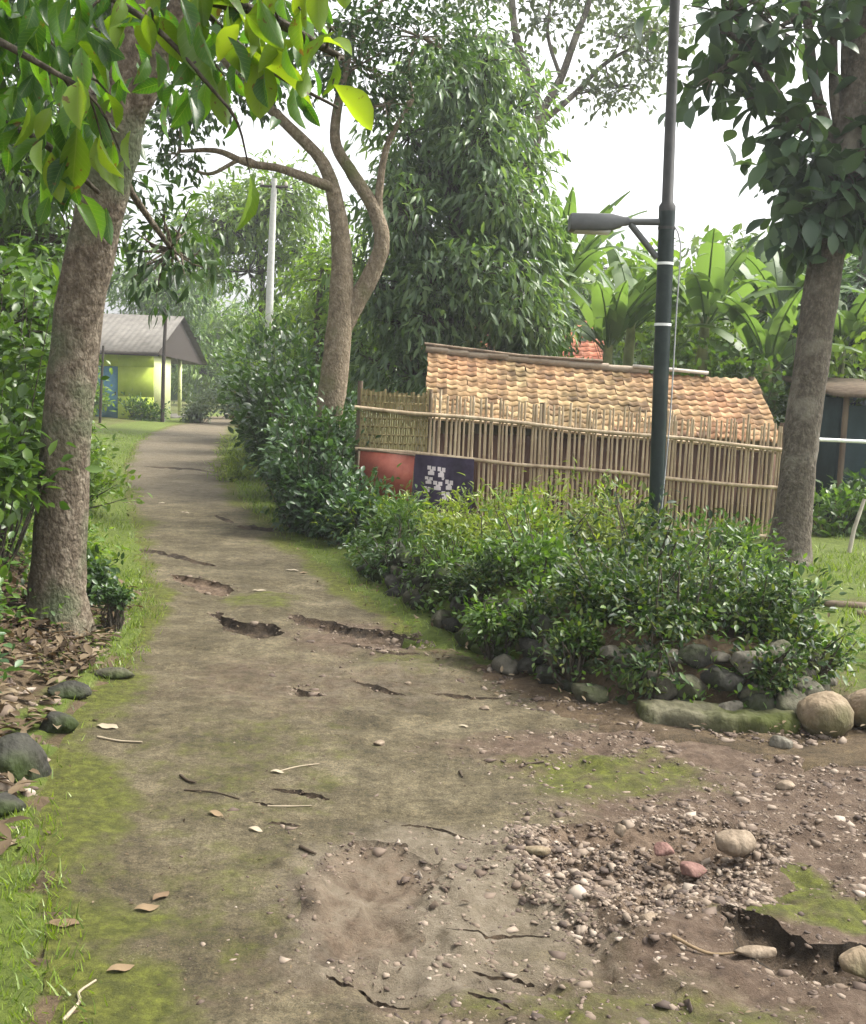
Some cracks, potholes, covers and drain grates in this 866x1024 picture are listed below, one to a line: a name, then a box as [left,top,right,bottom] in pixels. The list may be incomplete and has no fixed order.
pothole [211,612,284,639]
pothole [717,904,866,988]
crack [446,928,550,940]
crack [401,824,480,842]
crack [215,515,285,532]
pothole [171,575,234,597]
pothole [286,613,425,649]
pothole [286,840,447,979]
crack [352,680,406,697]
crack [139,549,217,568]
crack [468,971,535,1010]
crack [253,788,330,827]
